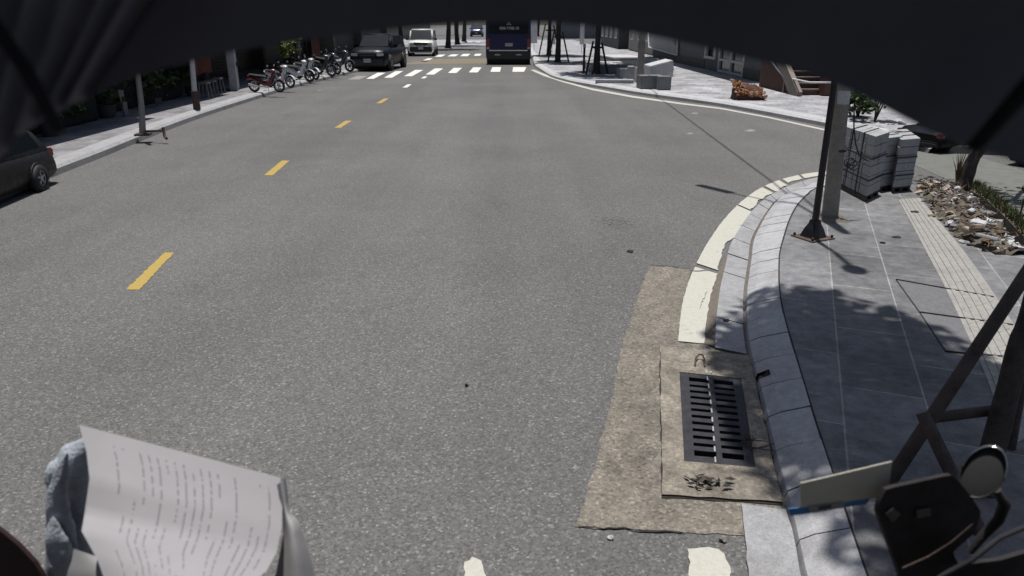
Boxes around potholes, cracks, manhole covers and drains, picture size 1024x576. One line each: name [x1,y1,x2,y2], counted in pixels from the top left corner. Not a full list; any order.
drain grate [659,346,783,505]
